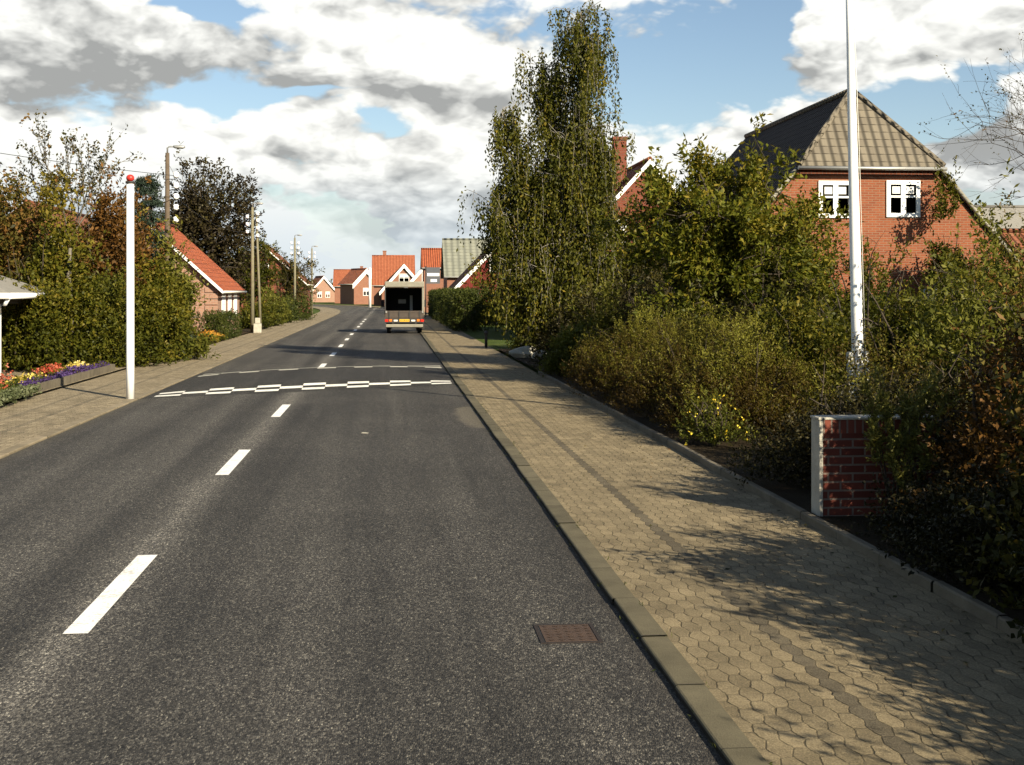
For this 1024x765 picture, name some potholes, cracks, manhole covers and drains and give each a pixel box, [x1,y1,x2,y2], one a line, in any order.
manhole cover [533,623,603,644]
